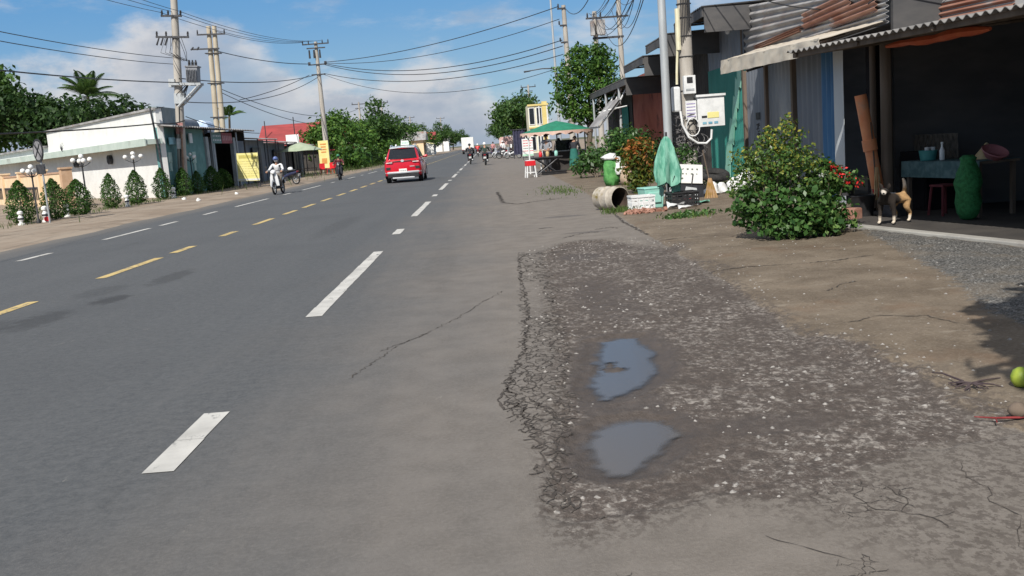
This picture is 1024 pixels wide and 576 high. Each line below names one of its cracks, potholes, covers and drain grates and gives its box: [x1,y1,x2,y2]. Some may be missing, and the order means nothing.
pothole [562,331,686,406]
crack [961,463,1022,547]
crack [348,291,502,379]
crack [765,535,888,576]
pothole [550,407,715,487]
crack [497,250,619,520]
crack [807,478,956,531]
